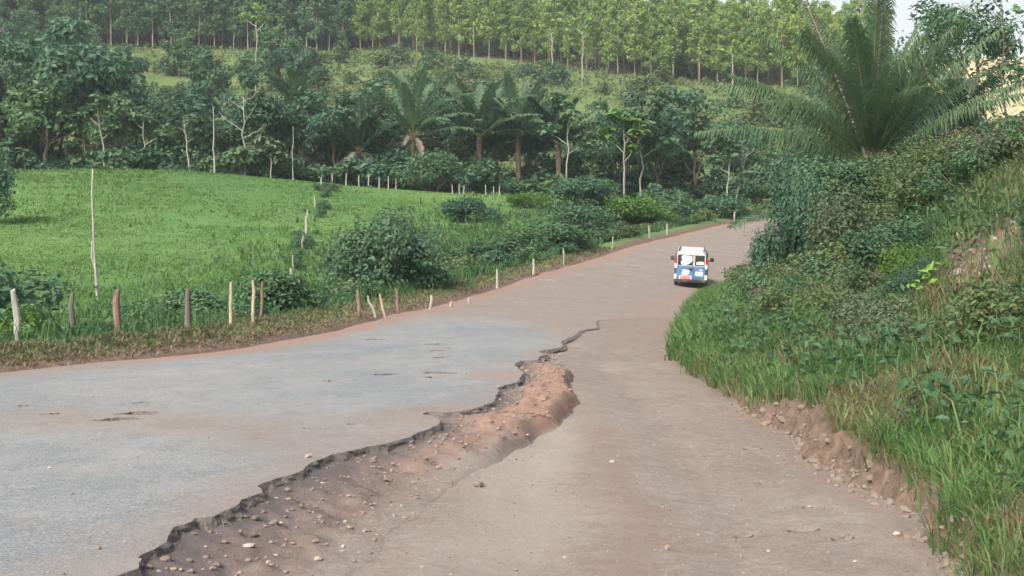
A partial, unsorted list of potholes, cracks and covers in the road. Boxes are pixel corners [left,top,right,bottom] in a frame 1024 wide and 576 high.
pothole [117,320,605,576]
